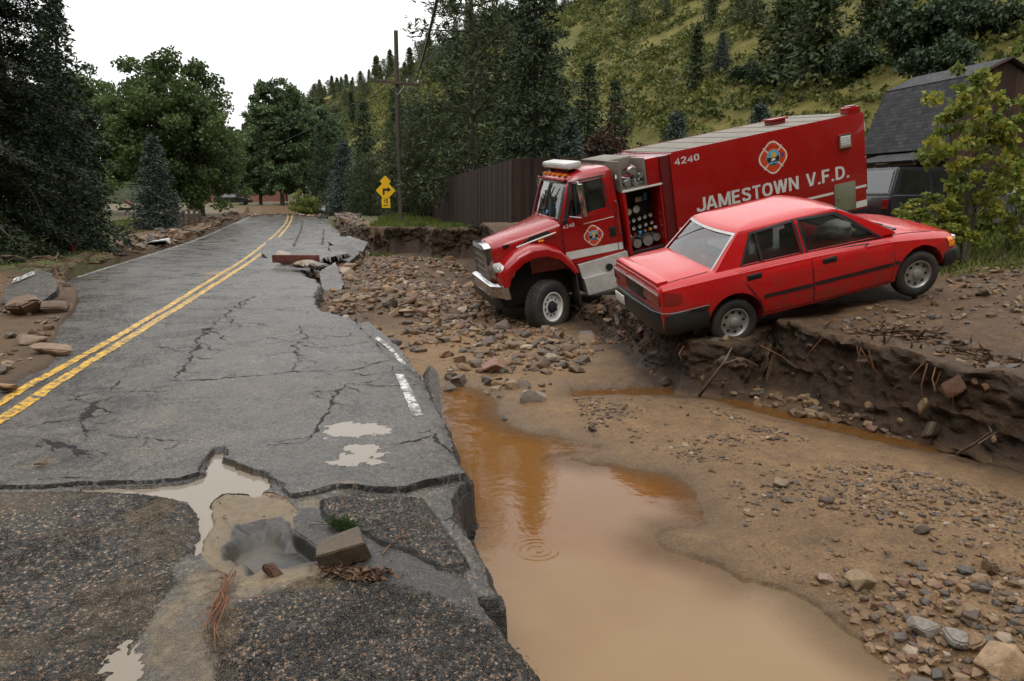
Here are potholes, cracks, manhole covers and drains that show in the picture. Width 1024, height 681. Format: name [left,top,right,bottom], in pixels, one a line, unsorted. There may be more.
crack [0,472,201,489]
crack [31,296,431,458]
pothole [200,492,325,579]
